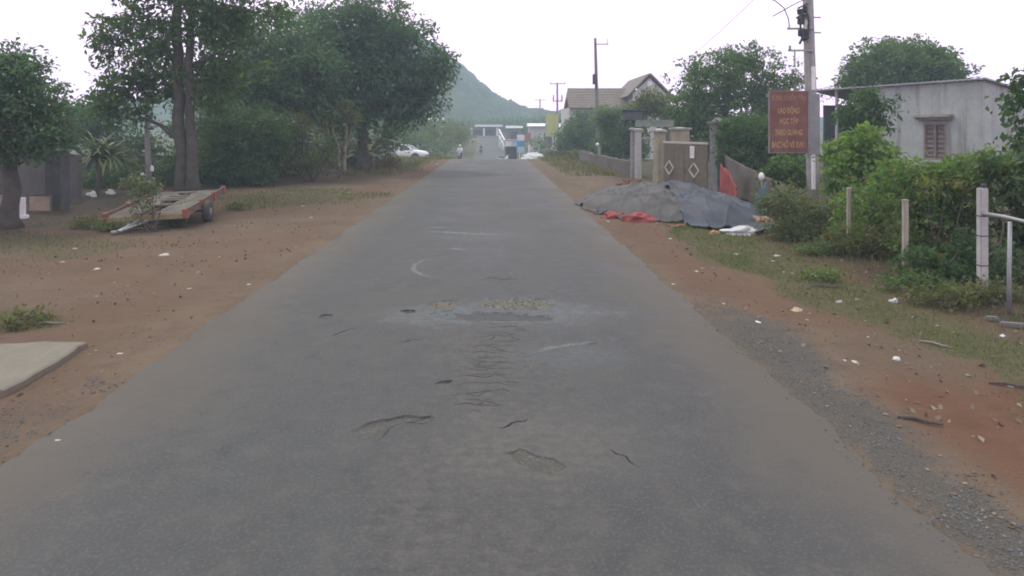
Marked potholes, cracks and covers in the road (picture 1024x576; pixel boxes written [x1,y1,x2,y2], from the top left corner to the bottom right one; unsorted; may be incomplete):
crack [455,322,598,428]
pothole [504,448,566,473]
pothole [425,299,461,309]
pothole [474,296,558,311]
crack [611,450,637,467]
